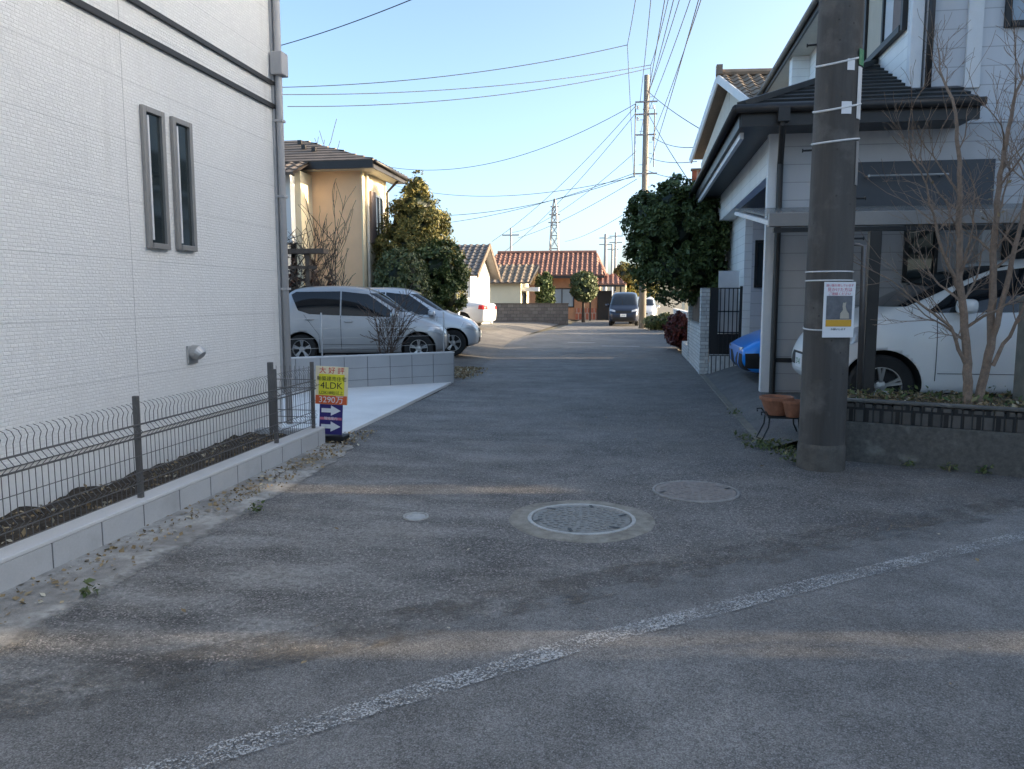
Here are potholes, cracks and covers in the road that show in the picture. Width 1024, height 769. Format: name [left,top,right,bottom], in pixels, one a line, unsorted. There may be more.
manhole cover [509,500,655,543]
manhole cover [402,512,429,521]
manhole cover [652,480,740,503]
